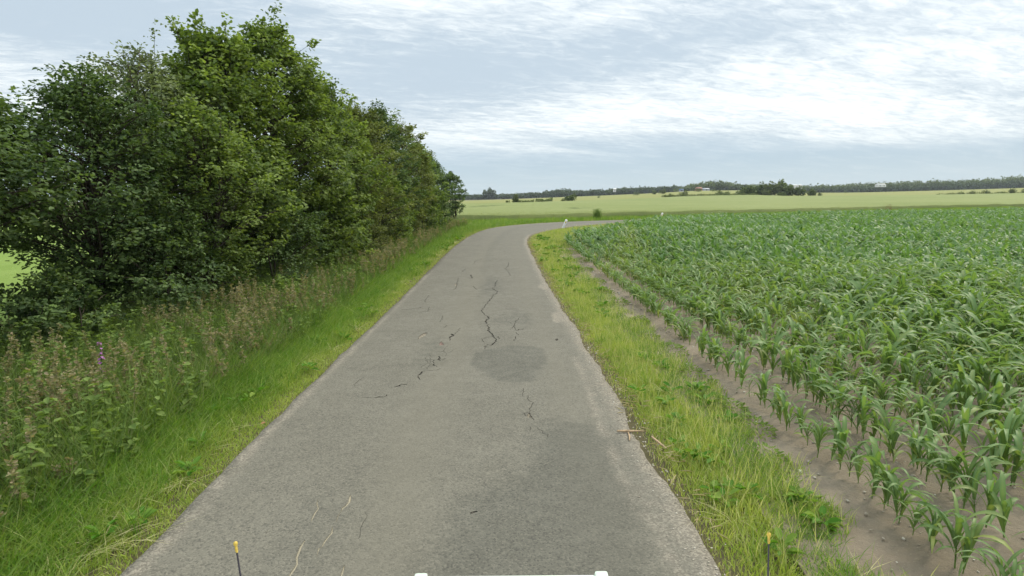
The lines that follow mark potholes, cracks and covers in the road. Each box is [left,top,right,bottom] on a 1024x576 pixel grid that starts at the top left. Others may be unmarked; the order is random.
crack [355,296,458,398]
crack [455,261,519,348]
